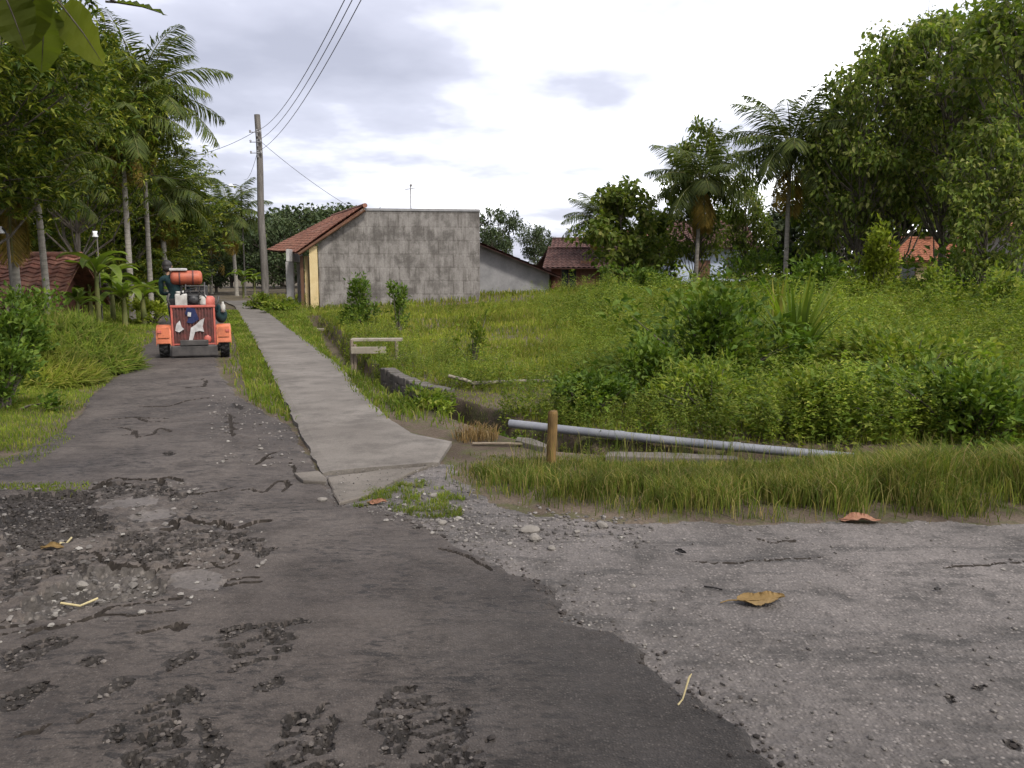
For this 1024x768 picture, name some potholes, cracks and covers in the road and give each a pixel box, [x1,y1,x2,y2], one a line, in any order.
pothole [0,636,79,671]
pothole [102,723,129,744]
crack [945,561,1024,569]
pothole [190,718,231,768]
pothole [97,529,279,568]
crack [107,378,238,438]
pothole [0,489,115,553]
crack [75,452,299,498]
pothole [200,618,312,673]
pothole [120,687,205,768]
